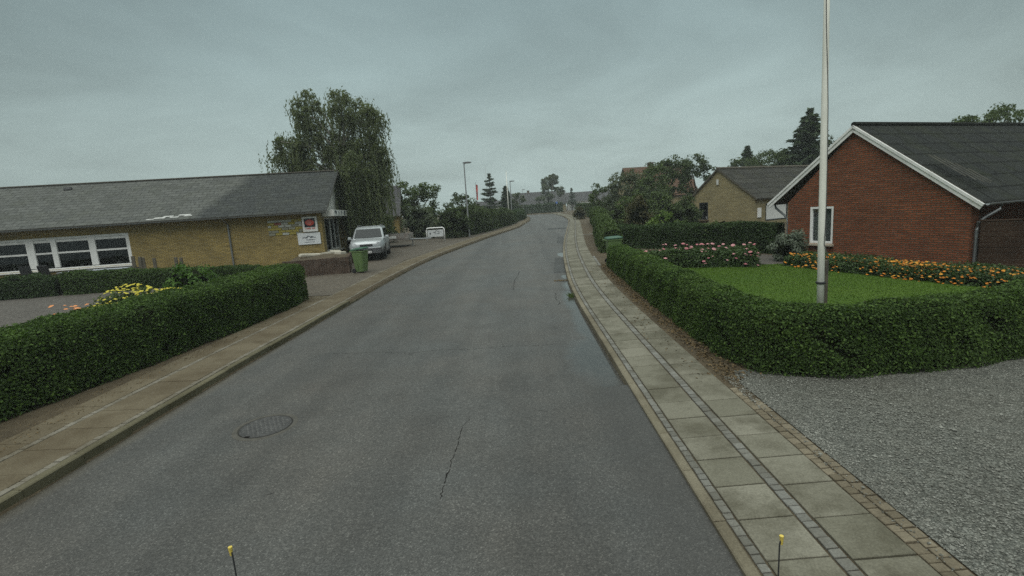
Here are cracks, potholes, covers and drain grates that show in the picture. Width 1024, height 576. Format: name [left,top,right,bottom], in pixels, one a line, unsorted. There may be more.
manhole cover [231,413,298,441]
crack [440,419,470,498]
